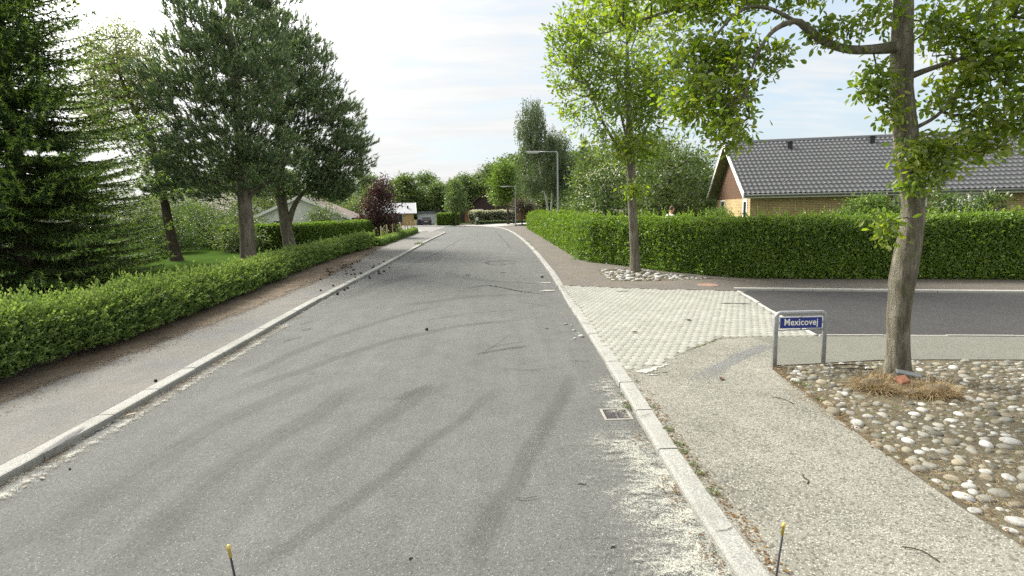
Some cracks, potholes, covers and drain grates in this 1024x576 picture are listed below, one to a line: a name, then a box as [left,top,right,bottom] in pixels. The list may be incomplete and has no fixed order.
drain grate [599,408,634,421]
